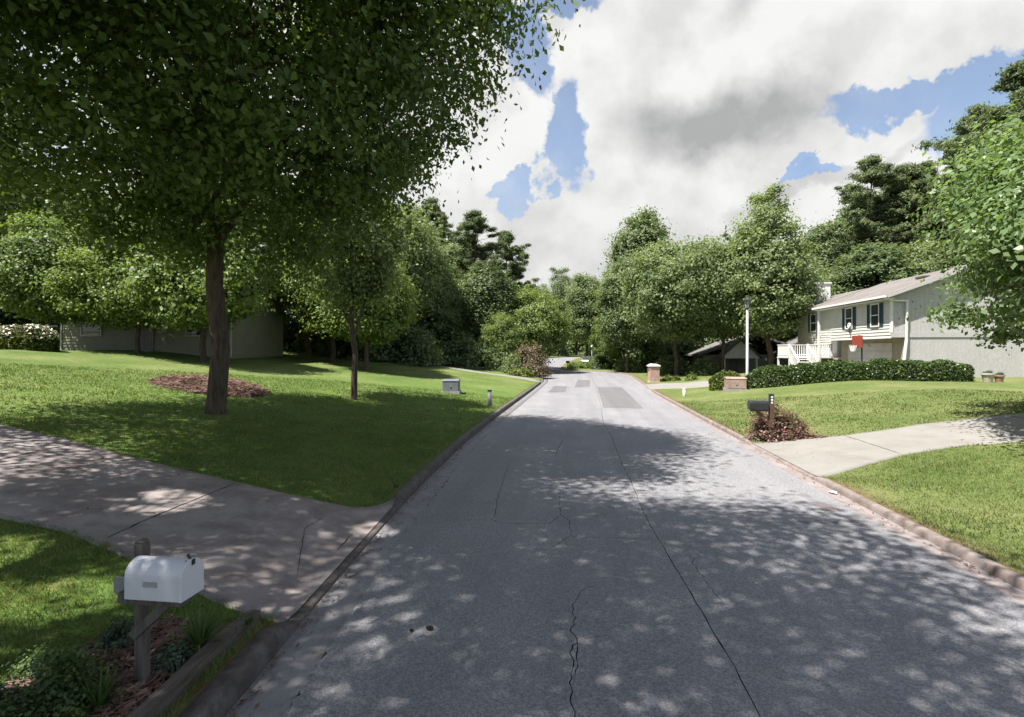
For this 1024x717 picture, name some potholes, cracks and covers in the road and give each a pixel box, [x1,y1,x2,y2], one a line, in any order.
crack [560,585,609,717]
crack [460,465,652,550]
